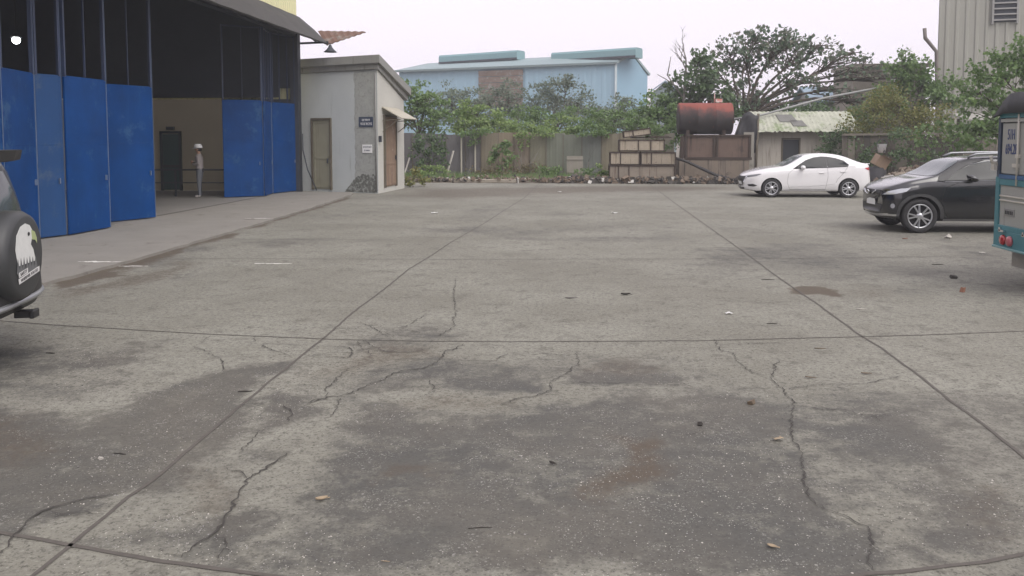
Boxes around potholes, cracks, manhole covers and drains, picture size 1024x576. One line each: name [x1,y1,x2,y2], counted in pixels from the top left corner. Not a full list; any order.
crack [715,341,898,568]
crack [181,430,287,562]
crack [239,269,692,420]
crack [0,493,120,552]
